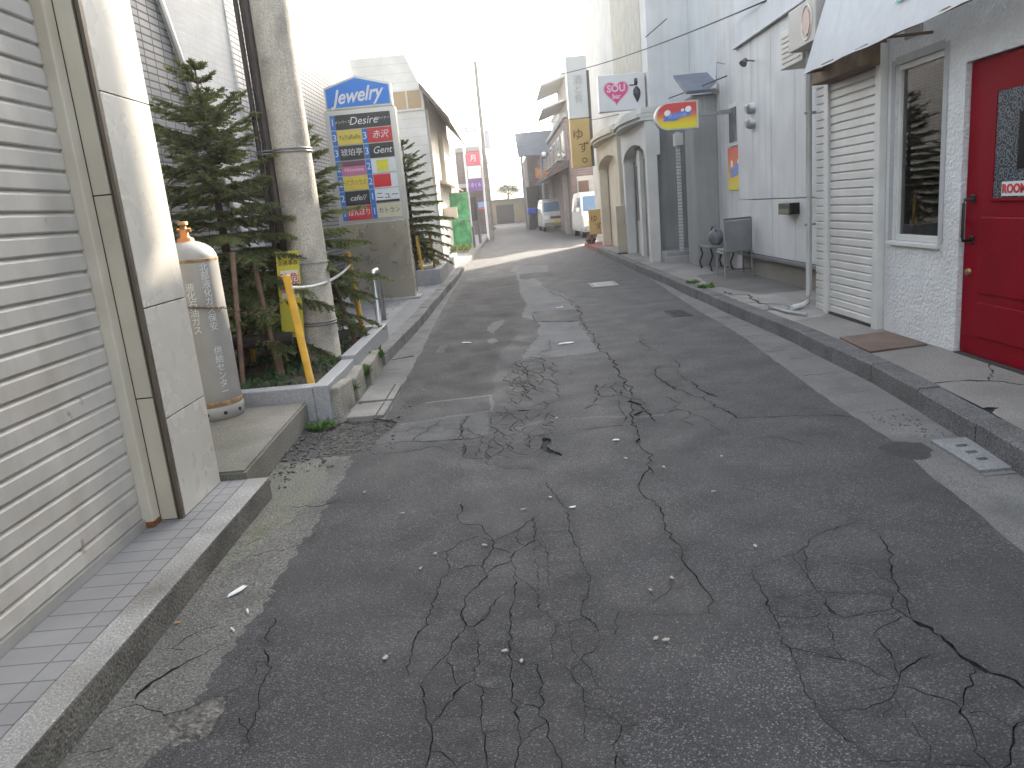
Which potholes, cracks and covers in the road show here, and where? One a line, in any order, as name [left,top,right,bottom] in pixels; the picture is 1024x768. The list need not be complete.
crack [936,365,1023,385]
crack [532,292,851,616]
crack [406,482,636,768]
crack [102,625,228,717]
crack [377,340,603,469]
manhole cover [664,309,693,317]
crack [751,521,1024,768]
crack [228,619,276,747]
